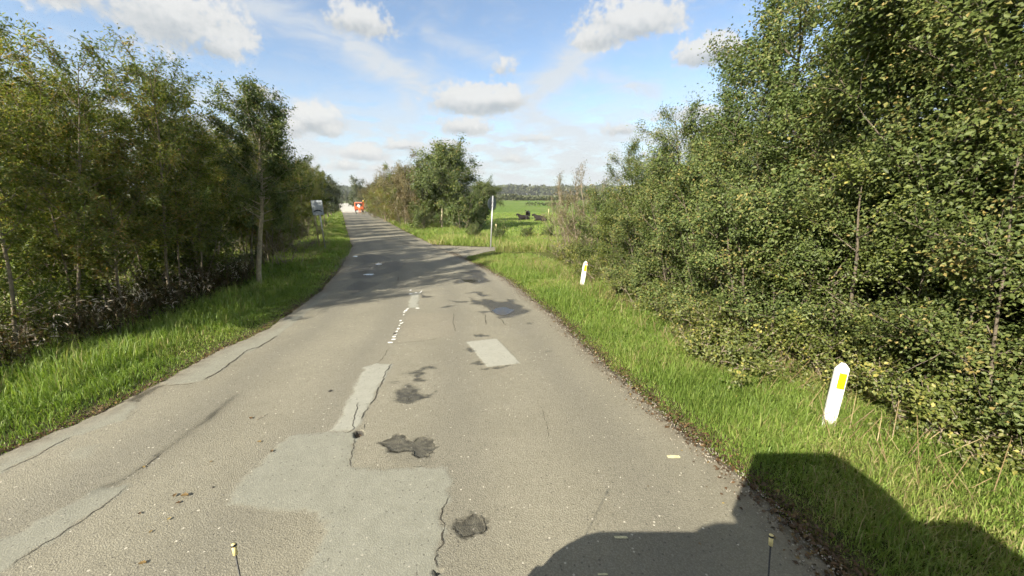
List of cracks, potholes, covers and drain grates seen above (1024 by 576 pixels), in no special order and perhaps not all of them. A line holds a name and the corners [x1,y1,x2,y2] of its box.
crack [434,493,450,568]
crack [9,490,122,567]
crack [169,336,276,386]
crack [349,349,421,470]
